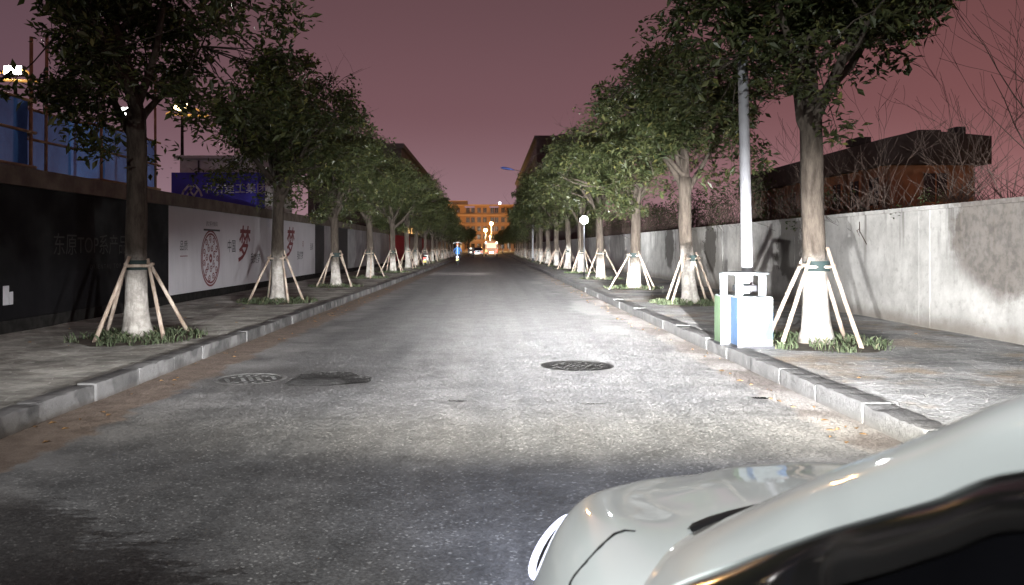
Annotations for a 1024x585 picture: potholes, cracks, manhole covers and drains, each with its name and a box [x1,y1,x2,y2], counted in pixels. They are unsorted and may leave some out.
pothole [285,371,373,386]
manhole cover [213,373,287,384]
manhole cover [541,361,614,371]
